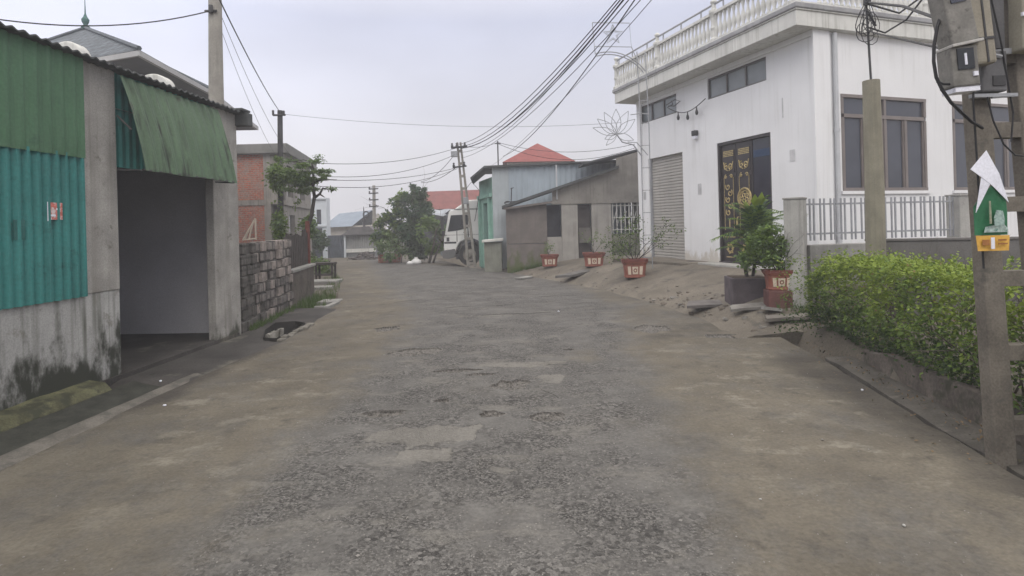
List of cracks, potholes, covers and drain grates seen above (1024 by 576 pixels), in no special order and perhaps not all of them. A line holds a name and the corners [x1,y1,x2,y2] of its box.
pothole [632,324,672,334]
pothole [489,379,532,391]
pothole [362,409,408,418]
pothole [527,412,566,422]
pothole [383,348,443,357]
